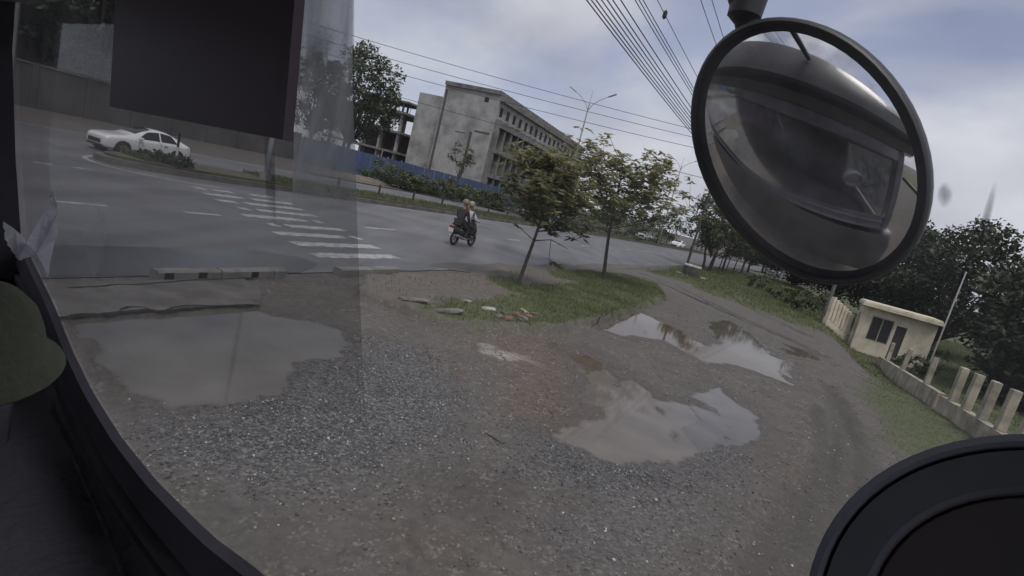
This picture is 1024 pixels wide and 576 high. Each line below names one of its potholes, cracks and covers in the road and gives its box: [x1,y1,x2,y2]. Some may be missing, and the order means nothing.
pothole [756,340,819,363]
pothole [590,304,807,391]
crack [59,277,258,318]
pothole [659,391,743,481]
pothole [677,380,782,459]
pothole [60,306,375,426]
